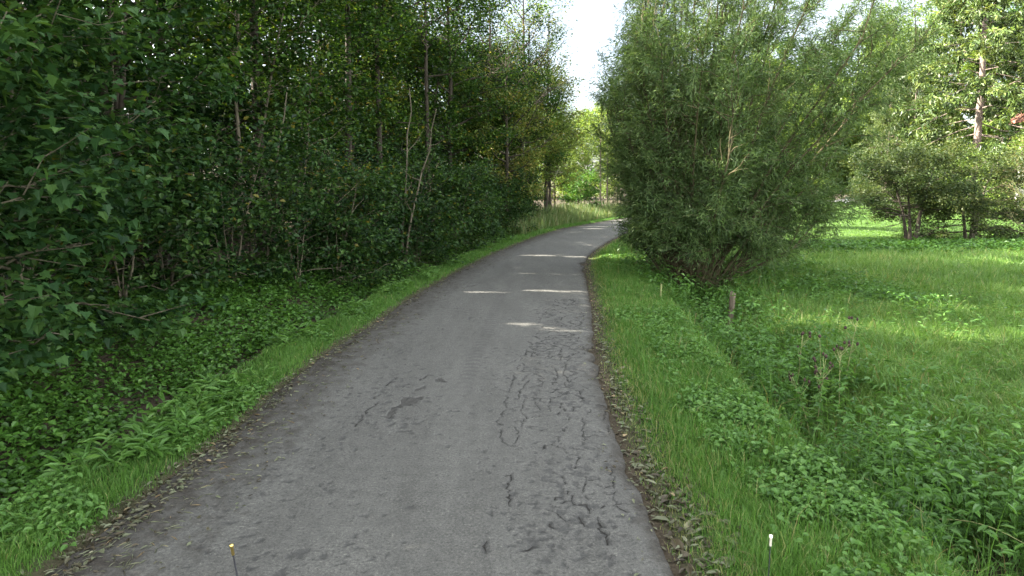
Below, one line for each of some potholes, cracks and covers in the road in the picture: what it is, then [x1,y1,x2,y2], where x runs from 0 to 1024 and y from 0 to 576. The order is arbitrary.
crack [496,299,626,545]
